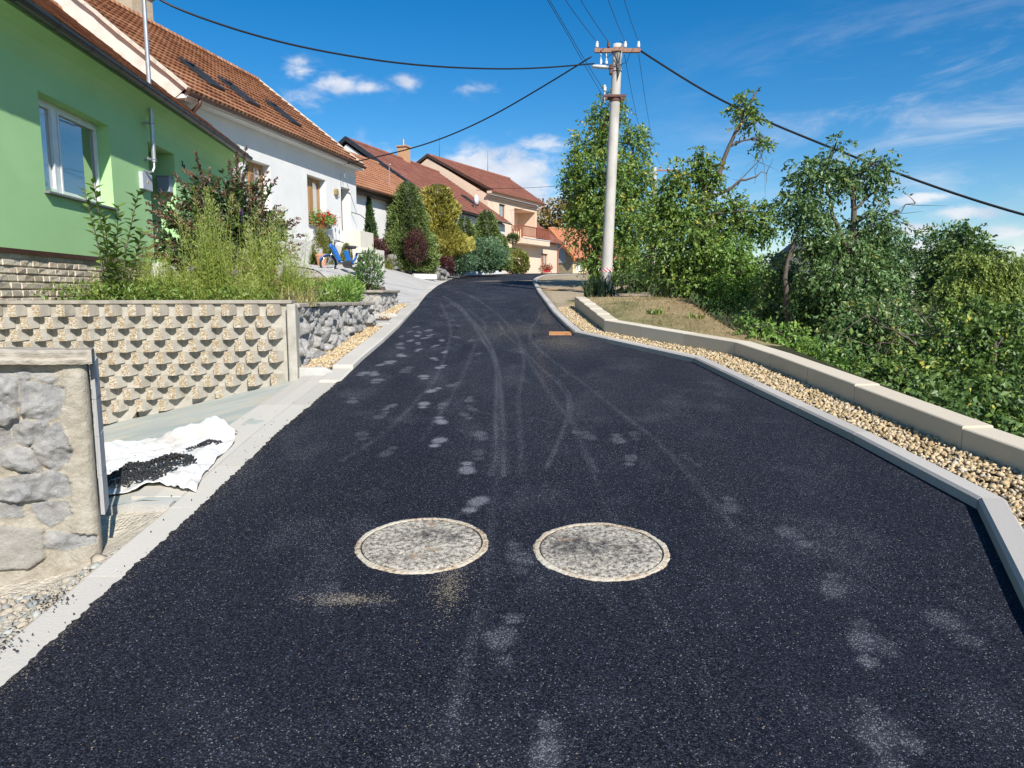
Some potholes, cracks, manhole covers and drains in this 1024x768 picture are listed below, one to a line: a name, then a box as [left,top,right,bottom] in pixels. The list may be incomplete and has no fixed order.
manhole cover [354,517,489,574]
manhole cover [533,522,670,582]
